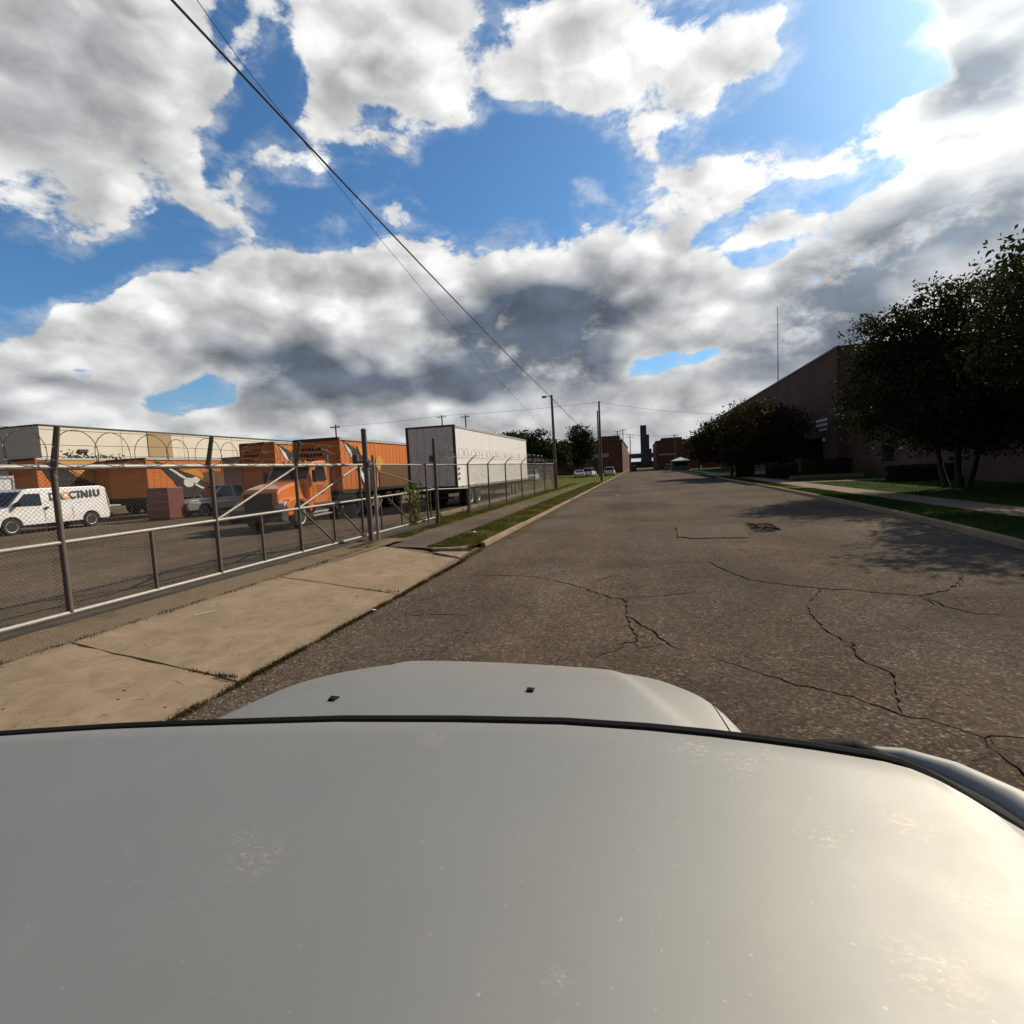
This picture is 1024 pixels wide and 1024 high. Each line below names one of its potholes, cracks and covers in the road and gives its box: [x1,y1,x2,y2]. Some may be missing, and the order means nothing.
crack [467,574,690,659]
crack [709,562,1024,777]
pothole [744,523,781,533]
